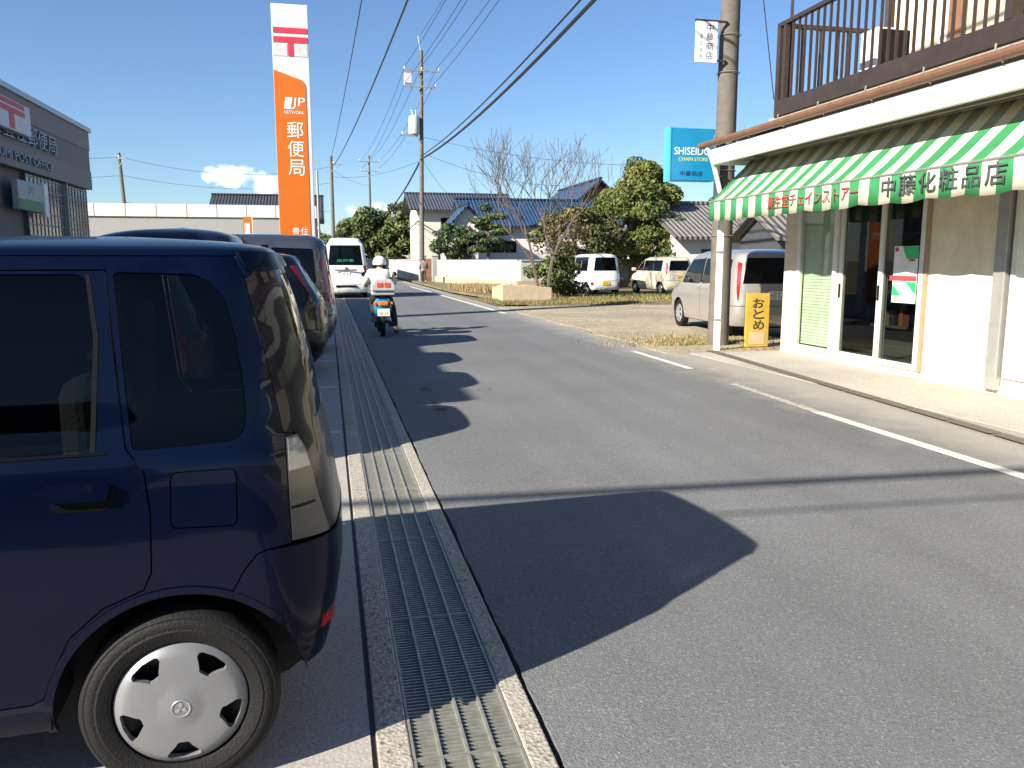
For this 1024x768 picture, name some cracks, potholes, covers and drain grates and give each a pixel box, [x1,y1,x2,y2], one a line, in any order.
drain grate [345,361,372,371]
drain grate [347,370,376,381]
drain grate [353,408,394,430]
drain grate [348,380,381,395]
drain grate [389,612,522,766]
drain grate [367,487,438,542]
drain grate [351,393,387,409]
drain grate [376,536,469,620]
drain grate [357,427,405,455]
drain grate [361,453,418,490]
drain grate [414,747,531,768]
drain grate [344,354,368,362]
